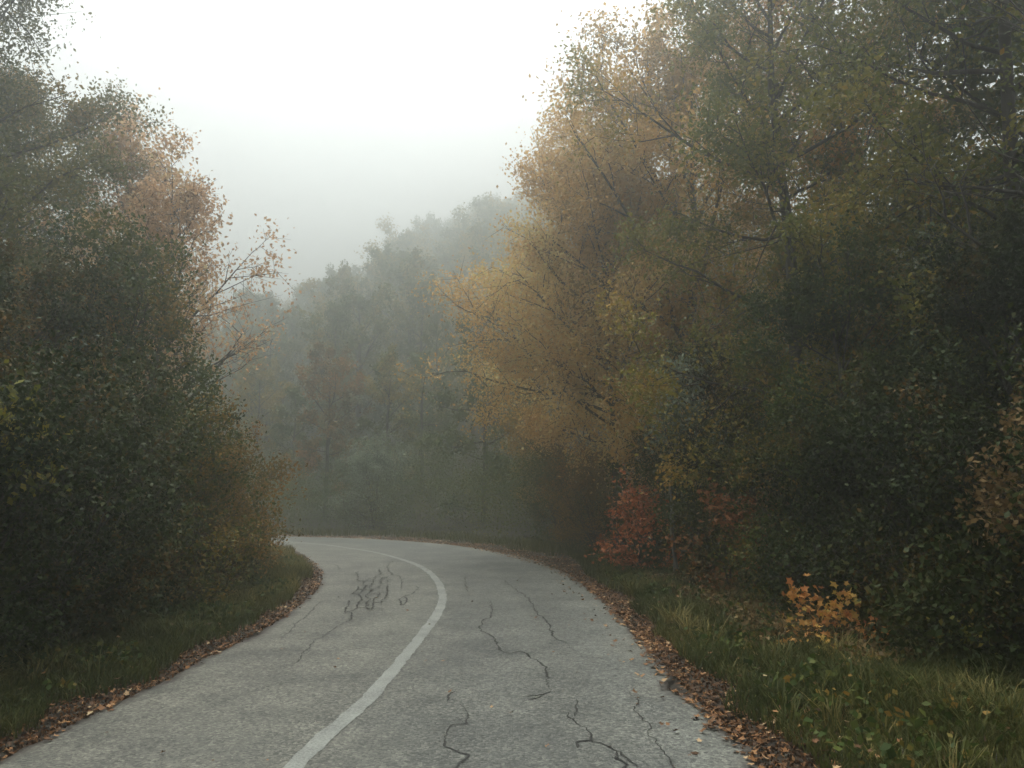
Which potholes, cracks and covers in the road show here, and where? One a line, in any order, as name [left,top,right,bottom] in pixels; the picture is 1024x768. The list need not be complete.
crack [273,563,418,669]
crack [439,691,470,768]
crack [478,578,675,768]
